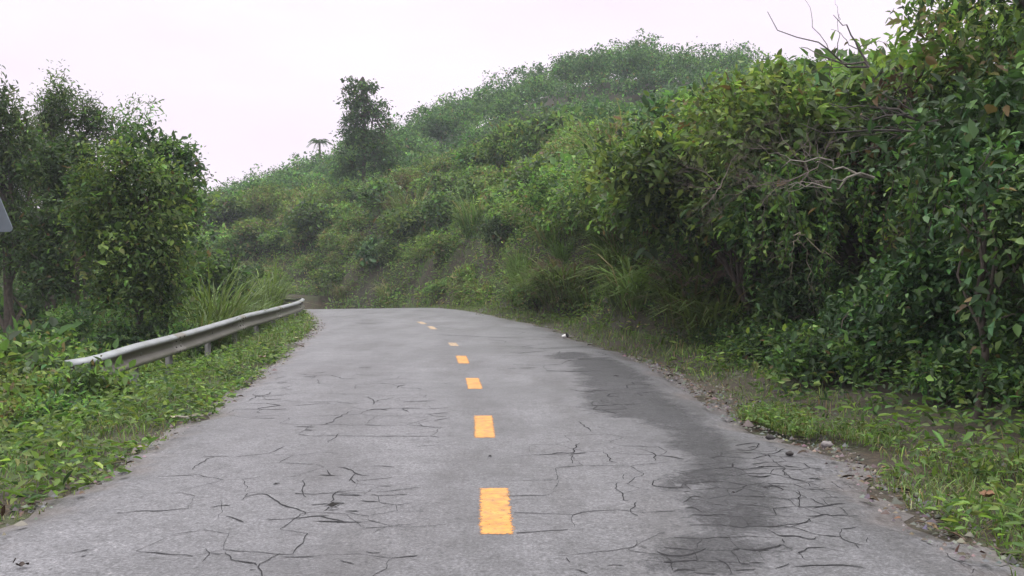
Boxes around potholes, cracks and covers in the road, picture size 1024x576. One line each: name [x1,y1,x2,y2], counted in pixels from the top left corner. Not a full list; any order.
crack [516,382,868,574]
crack [123,367,448,576]
